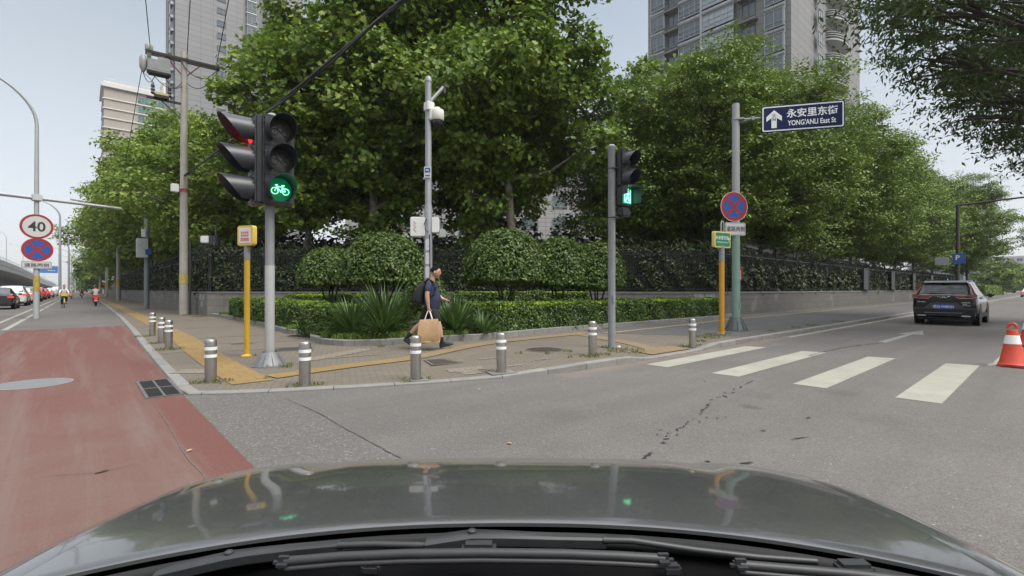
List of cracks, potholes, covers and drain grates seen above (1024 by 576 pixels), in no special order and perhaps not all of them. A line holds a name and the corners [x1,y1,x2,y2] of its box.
crack [153,401,206,479]
drain grate [136,378,184,399]
crack [642,381,752,459]
